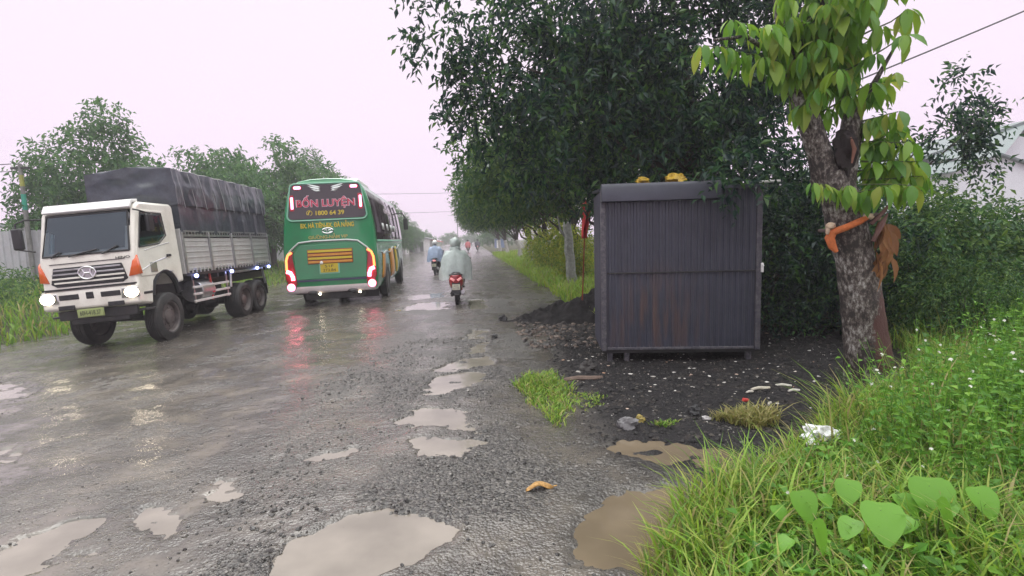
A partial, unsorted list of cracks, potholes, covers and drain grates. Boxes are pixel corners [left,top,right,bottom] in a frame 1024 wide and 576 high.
pothole [0,381,48,403]
pothole [0,511,116,576]
pothole [258,503,463,576]
pothole [416,369,493,395]
pothole [452,328,491,341]
pothole [393,431,504,459]
pothole [286,444,363,465]
pothole [554,477,698,576]
pothole [194,472,248,506]
pothole [385,405,487,434]
pothole [393,301,453,312]
pothole [599,433,788,477]
